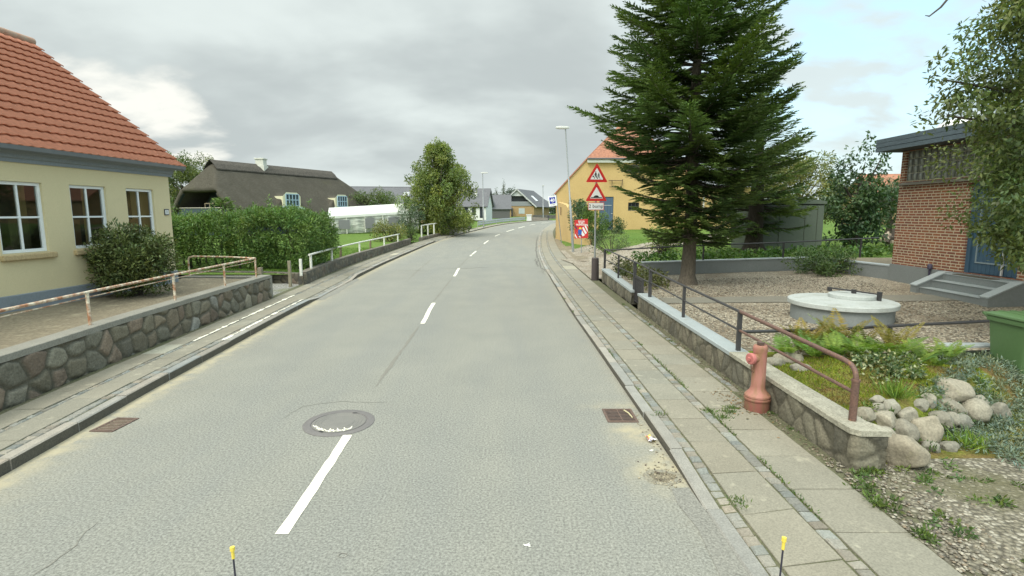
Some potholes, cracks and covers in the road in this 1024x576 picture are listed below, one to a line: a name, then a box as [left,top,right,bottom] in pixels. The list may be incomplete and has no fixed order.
crack [32,526,93,576]
drain grate [89,417,139,432]
manhole cover [302,410,375,437]
drain grate [602,409,639,423]
pothole [643,469,683,485]
